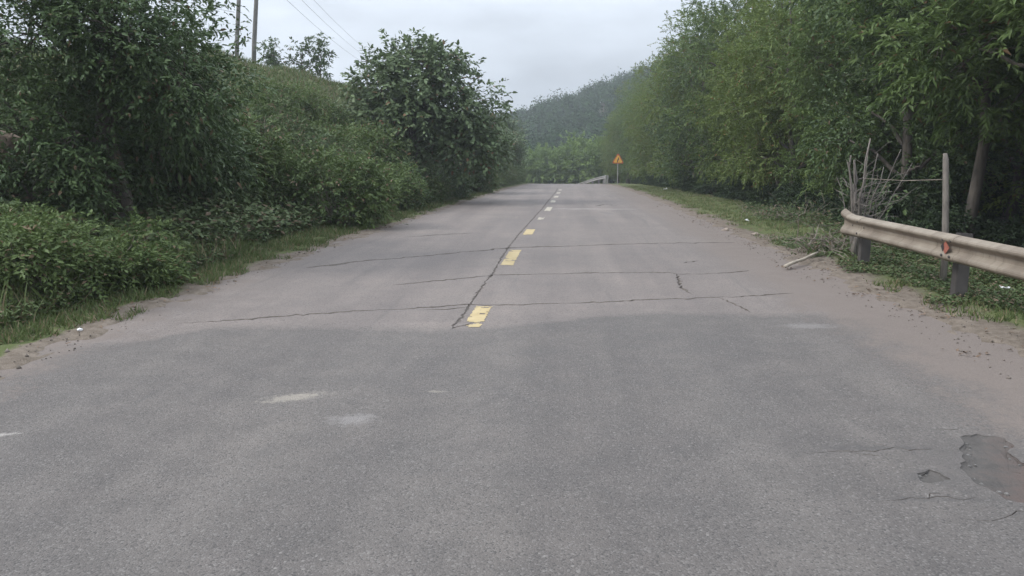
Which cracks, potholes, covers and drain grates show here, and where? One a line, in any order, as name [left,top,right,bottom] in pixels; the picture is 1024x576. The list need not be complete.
pothole [917,470,950,483]
crack [821,443,928,455]
pothole [959,434,1024,503]
crack [181,192,790,328]
crack [885,493,975,501]
